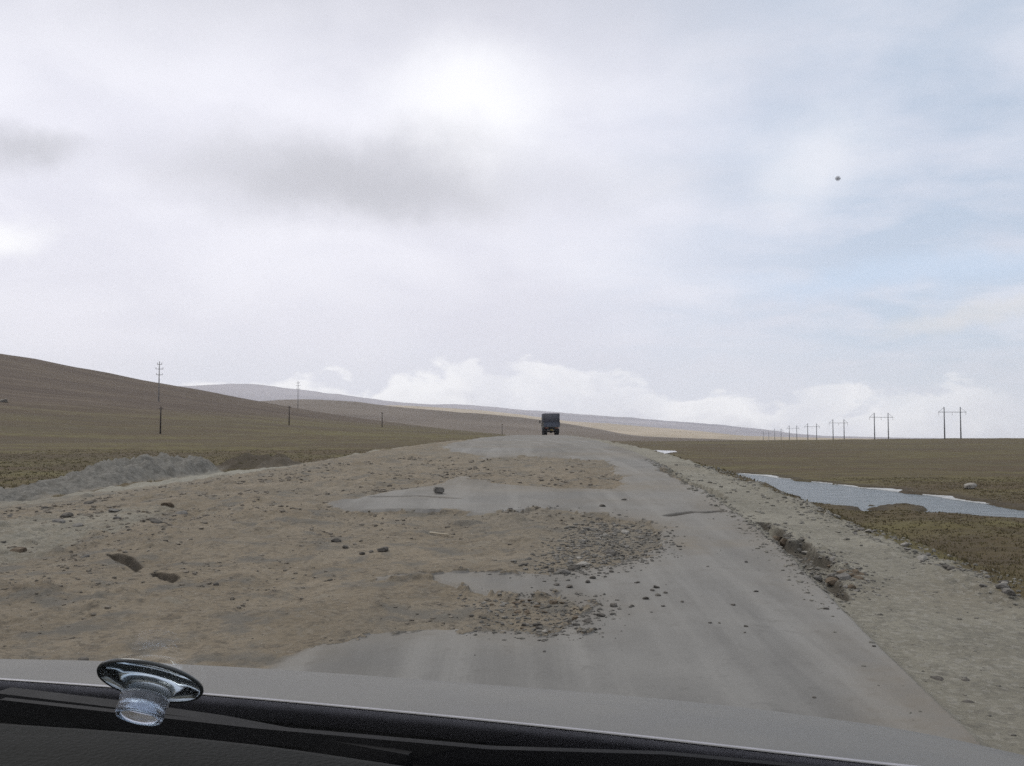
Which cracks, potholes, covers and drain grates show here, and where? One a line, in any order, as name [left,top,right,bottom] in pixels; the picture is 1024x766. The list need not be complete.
pothole [107,553,144,573]
pothole [151,572,180,583]
pothole [46,574,590,668]
pothole [448,455,628,489]
pothole [217,506,668,584]
pothole [756,522,850,601]
